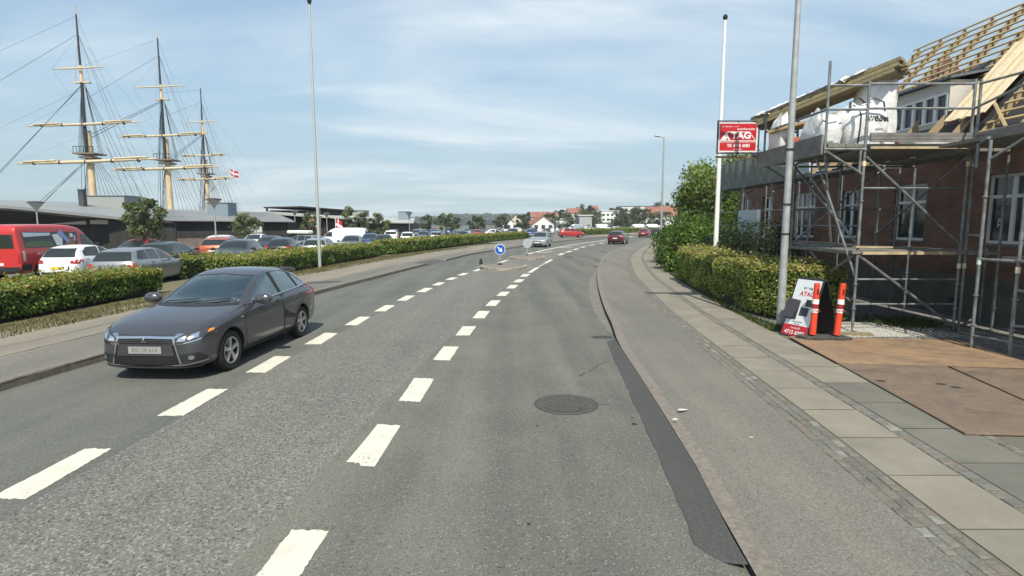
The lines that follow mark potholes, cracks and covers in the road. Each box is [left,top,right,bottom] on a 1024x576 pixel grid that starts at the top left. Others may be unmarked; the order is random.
manhole cover [534,394,598,415]
